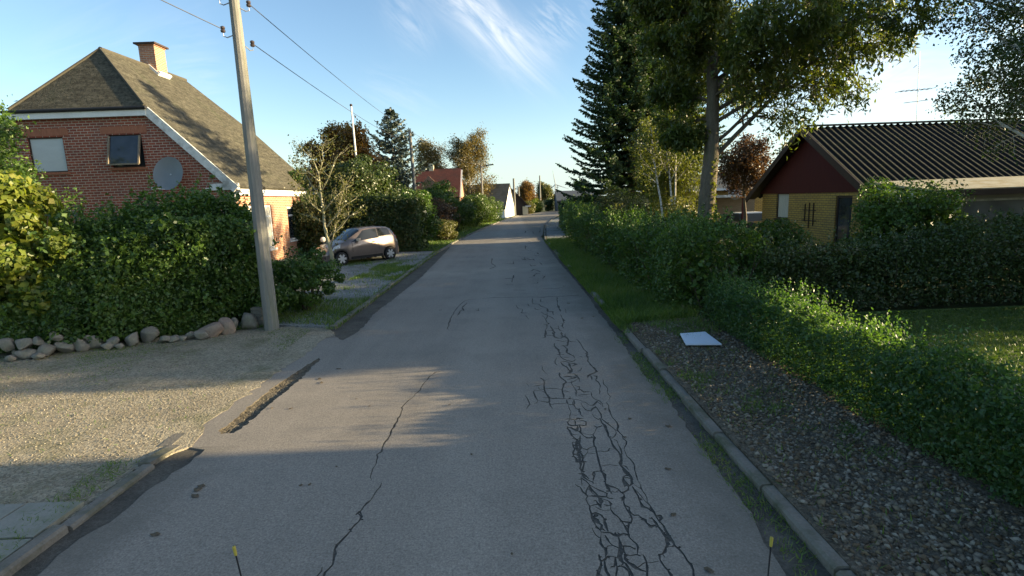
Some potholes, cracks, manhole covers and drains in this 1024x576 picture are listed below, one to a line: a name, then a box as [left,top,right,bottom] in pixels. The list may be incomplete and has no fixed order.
crack [447,229,695,576]
crack [317,371,440,576]
pothole [219,358,320,434]
